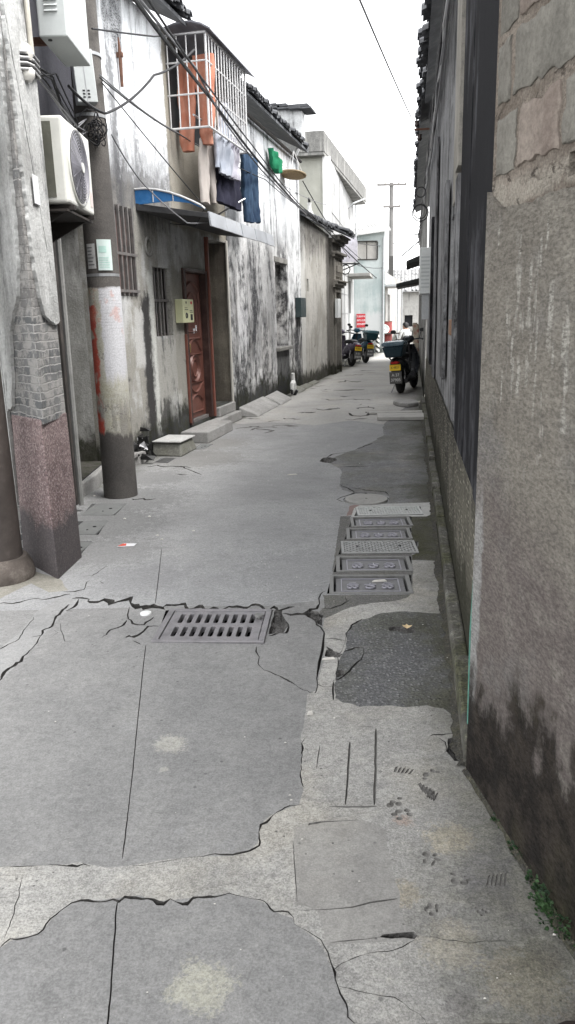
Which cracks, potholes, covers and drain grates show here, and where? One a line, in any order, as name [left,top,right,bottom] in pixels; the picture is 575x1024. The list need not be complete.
utility cover [78,521,108,535]
drain grate [151,609,272,644]
utility cover [81,504,126,515]
pothole [269,611,288,634]
crack [0,566,364,700]
manhole cover [343,494,389,505]
